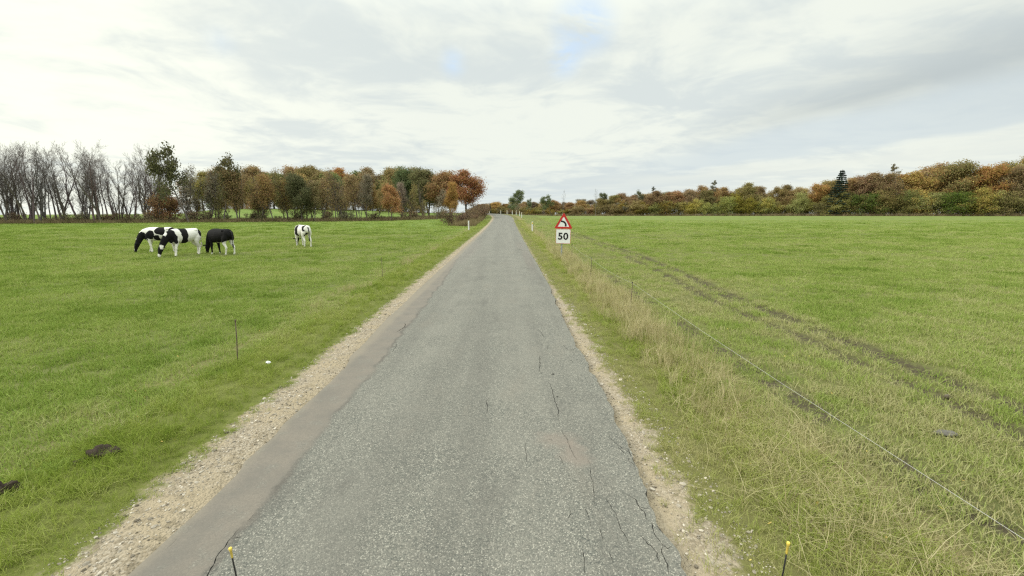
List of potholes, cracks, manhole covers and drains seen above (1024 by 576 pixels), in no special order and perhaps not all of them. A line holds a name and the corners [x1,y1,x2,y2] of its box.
crack [539,330,670,573]
